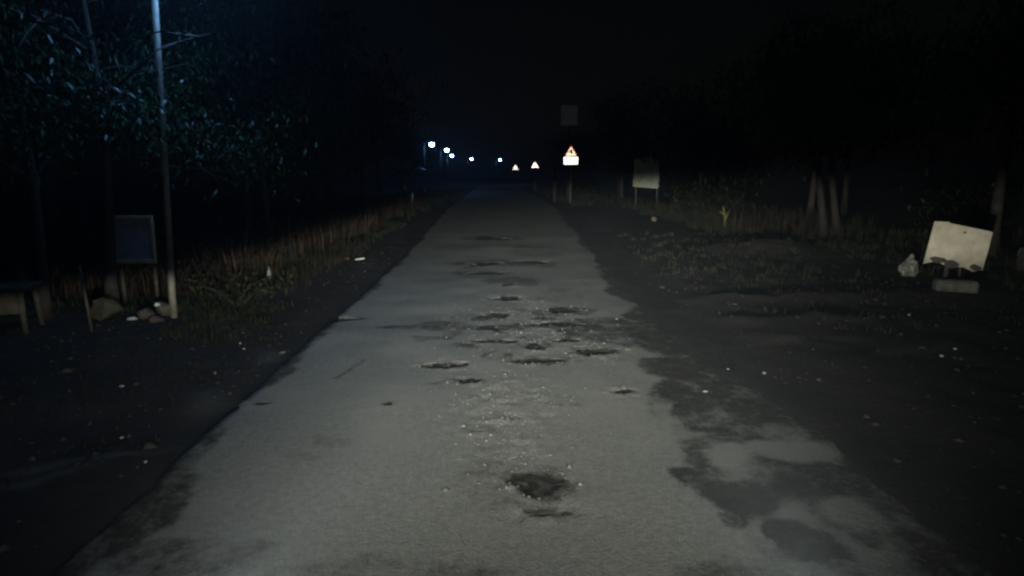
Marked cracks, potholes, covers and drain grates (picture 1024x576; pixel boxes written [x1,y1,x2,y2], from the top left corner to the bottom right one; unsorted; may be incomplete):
pothole [565,347,622,358]
pothole [499,356,576,366]
pothole [601,385,643,398]
pothole [458,337,528,346]
pothole [444,375,497,387]
pothole [513,340,555,353]
pothole [408,359,479,372]
crack [326,358,374,380]
pothole [497,466,579,503]
pothole [465,311,519,320]
pothole [509,502,590,526]
pothole [539,306,589,315]
